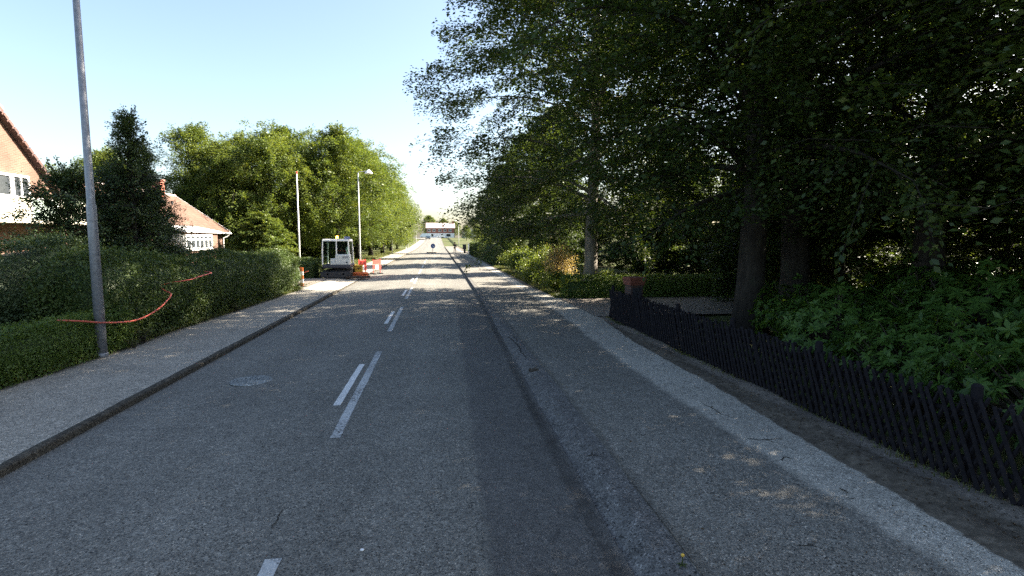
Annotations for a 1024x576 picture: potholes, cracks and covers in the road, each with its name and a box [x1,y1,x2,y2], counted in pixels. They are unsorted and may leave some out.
manhole cover [229,375,273,386]
